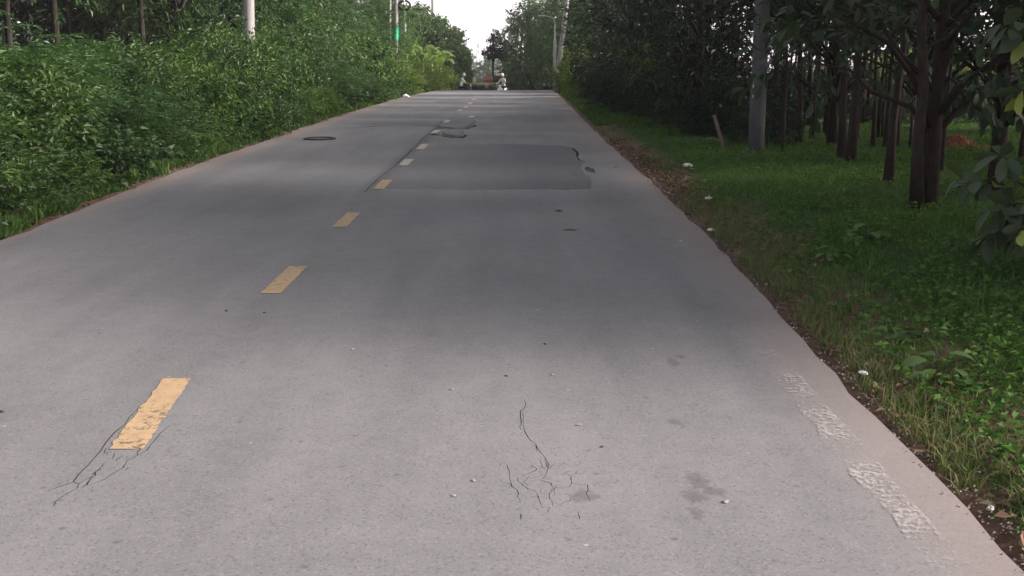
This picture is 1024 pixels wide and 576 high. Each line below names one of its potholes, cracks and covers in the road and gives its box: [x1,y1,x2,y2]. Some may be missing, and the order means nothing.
crack [482,402,605,520]
crack [54,417,168,505]
